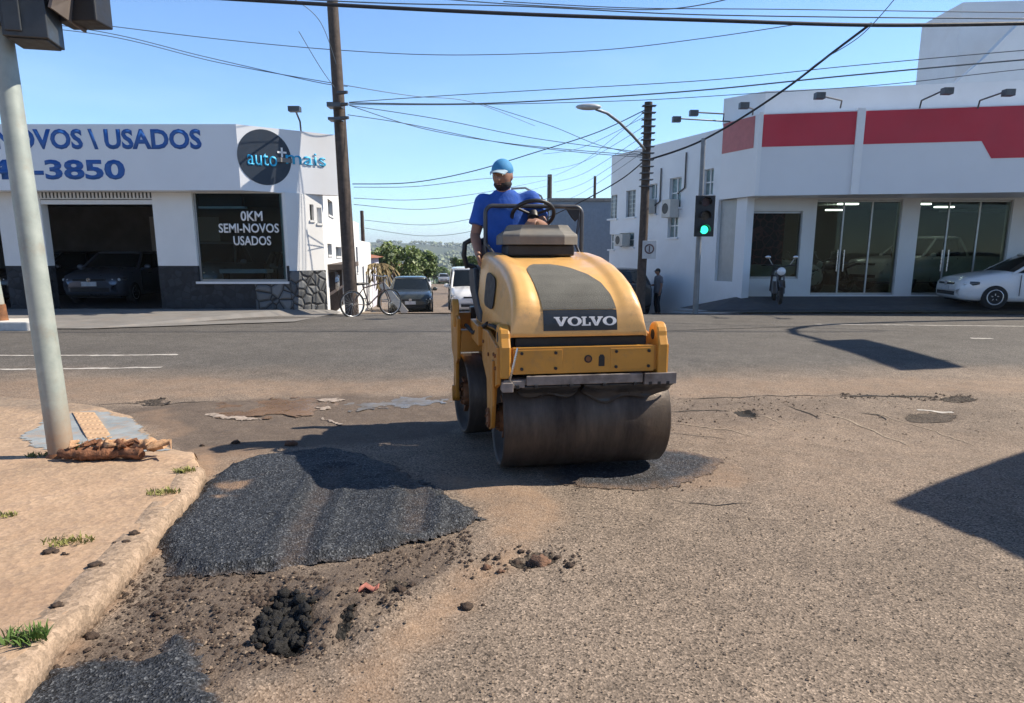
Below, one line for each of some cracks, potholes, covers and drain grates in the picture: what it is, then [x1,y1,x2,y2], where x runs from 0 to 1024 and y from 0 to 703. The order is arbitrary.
crack [676,404,979,447]
pothole [734,410,760,418]
pothole [336,604,357,642]
pothole [386,579,408,592]
pothole [136,397,171,406]
pothole [249,587,317,657]
